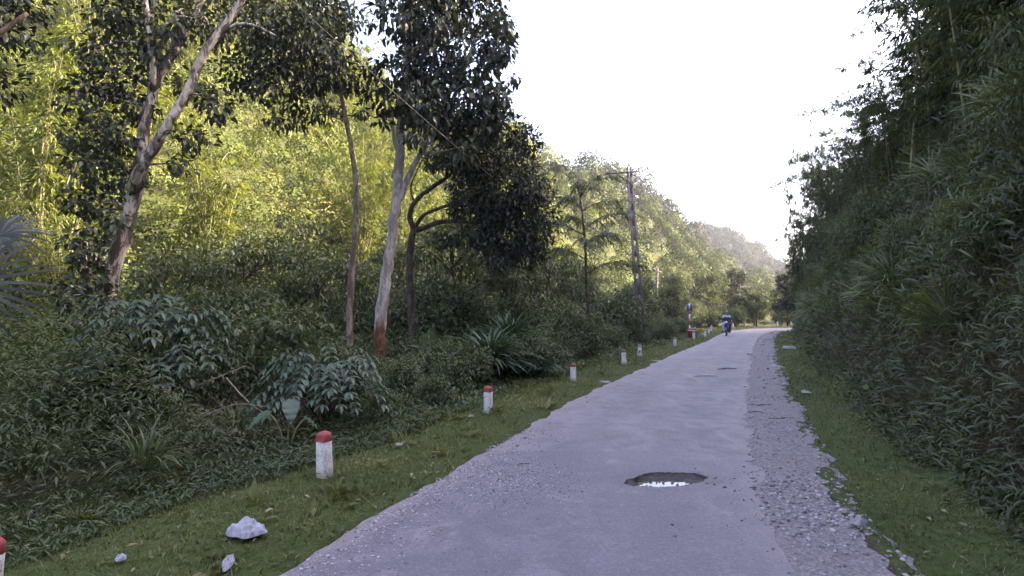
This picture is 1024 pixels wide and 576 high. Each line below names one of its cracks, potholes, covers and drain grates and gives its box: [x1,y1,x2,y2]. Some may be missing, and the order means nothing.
pothole [624,472,708,487]
